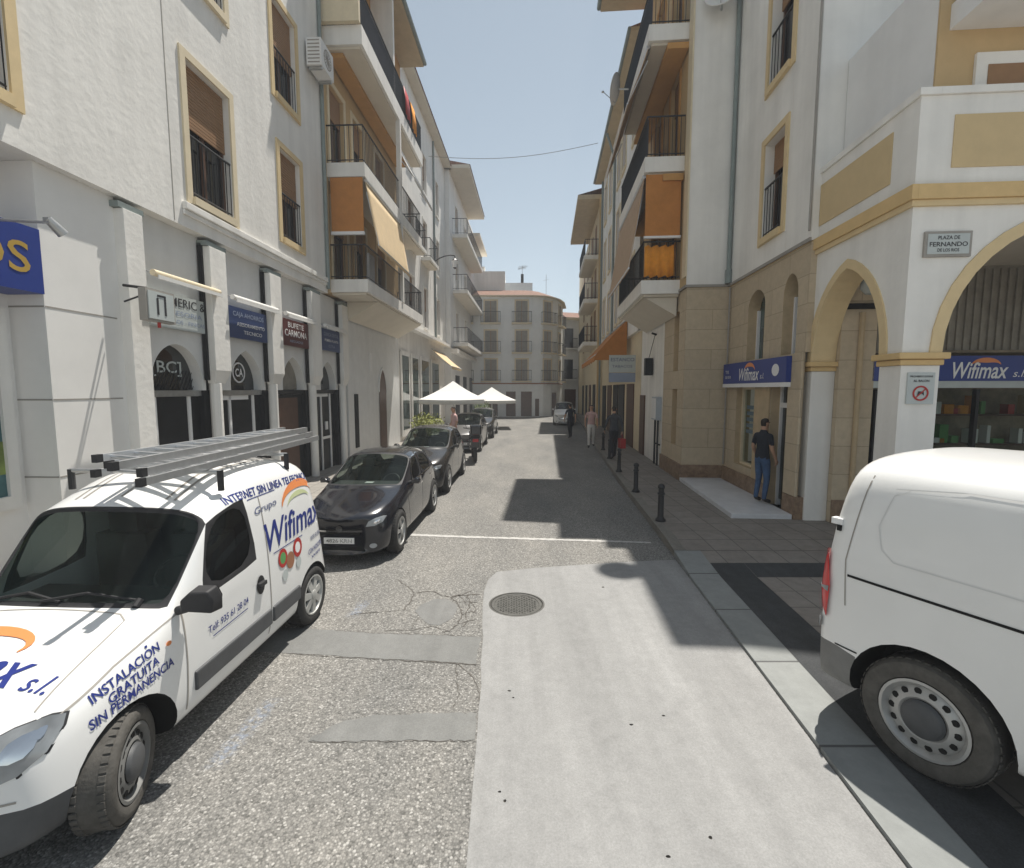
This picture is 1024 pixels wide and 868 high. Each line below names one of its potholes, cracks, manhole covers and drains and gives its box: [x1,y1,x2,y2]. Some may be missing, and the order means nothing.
crack [336,580,480,637]
manhole cover [489,592,545,617]
